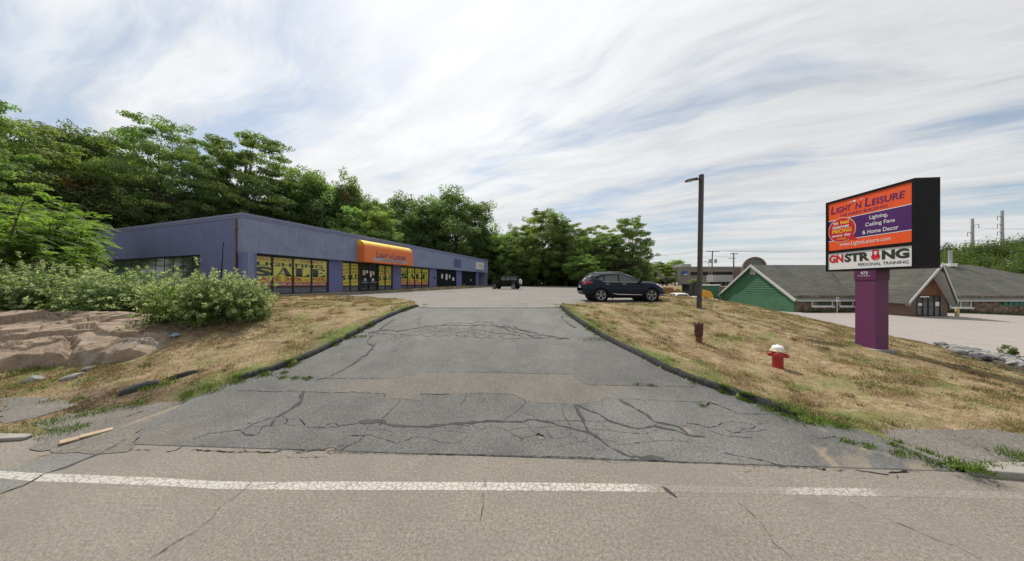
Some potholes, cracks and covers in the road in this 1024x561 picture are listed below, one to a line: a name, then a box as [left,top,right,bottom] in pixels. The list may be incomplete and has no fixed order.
crack [194,416,338,451]
crack [271,394,834,472]
crack [380,316,568,351]
